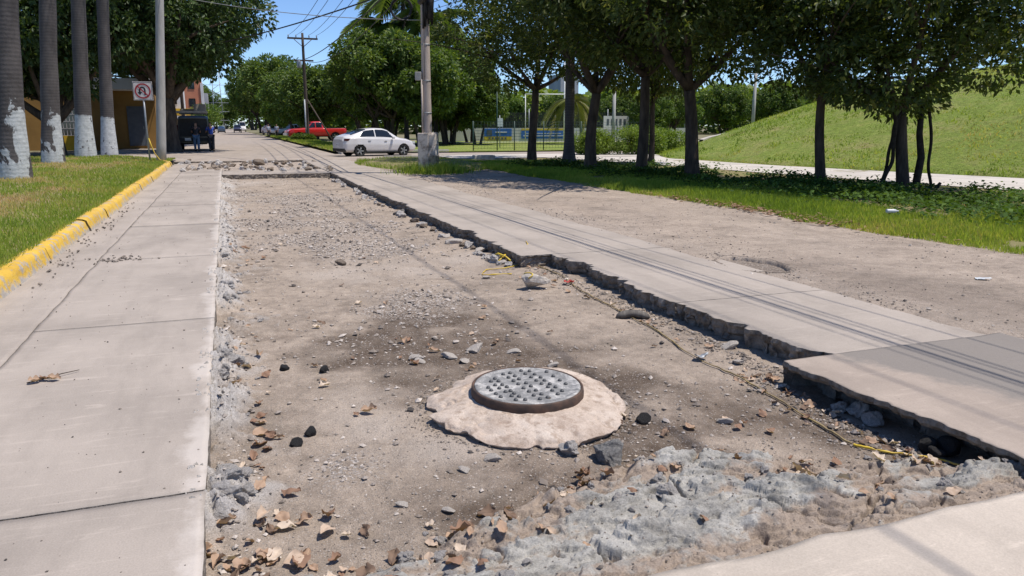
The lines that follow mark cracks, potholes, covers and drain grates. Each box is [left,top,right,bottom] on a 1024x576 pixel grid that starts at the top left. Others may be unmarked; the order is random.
pothole [712,255,796,273]
manhole cover [426,367,626,450]
